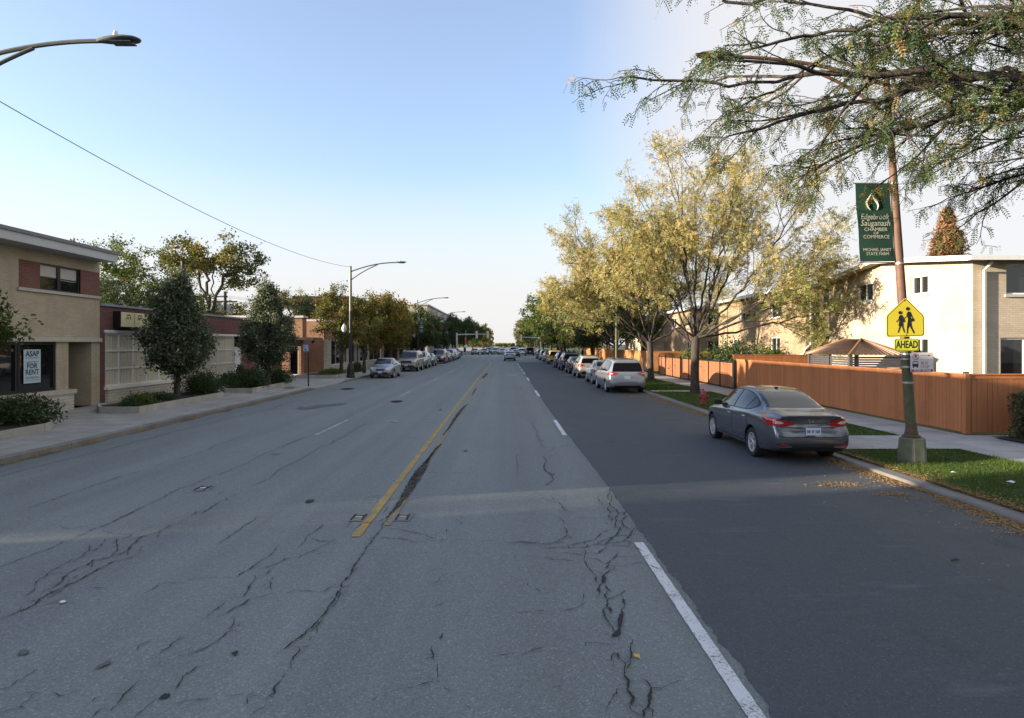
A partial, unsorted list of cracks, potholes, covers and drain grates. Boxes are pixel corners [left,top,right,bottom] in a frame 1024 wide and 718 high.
crack [484,409,696,717]
crack [2,417,461,715]
